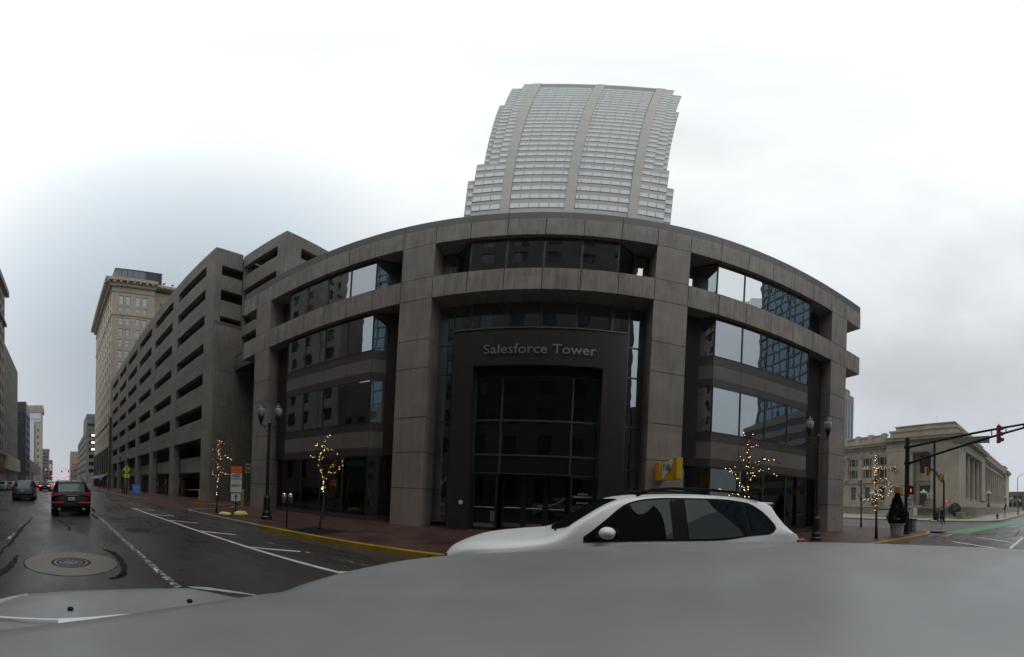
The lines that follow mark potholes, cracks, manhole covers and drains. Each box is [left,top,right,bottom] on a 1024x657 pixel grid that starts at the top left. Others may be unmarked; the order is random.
manhole cover [23,552,118,576]
